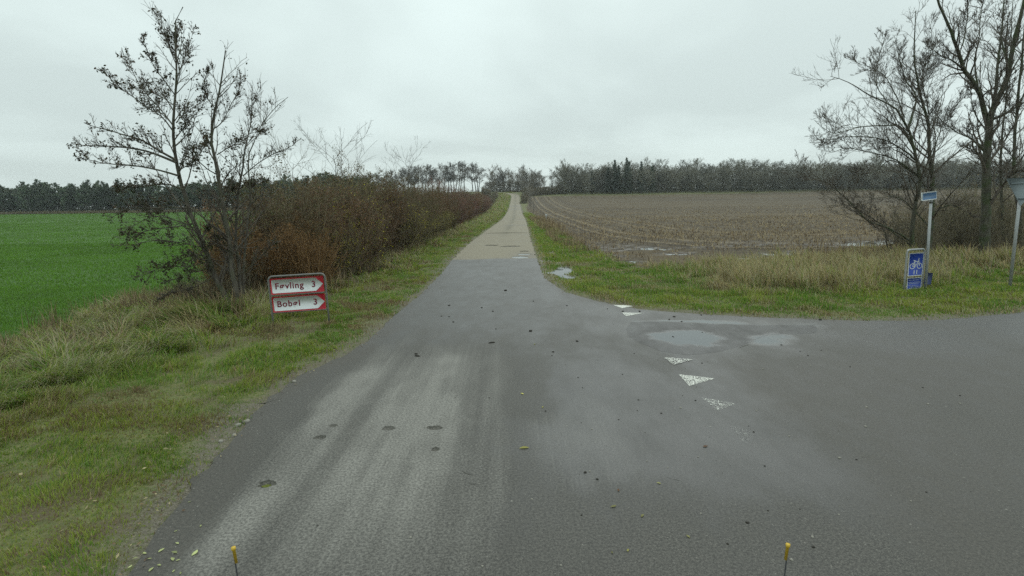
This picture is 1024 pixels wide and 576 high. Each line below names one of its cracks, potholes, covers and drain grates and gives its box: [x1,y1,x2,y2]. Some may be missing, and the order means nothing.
pothole [258,480,276,488]
